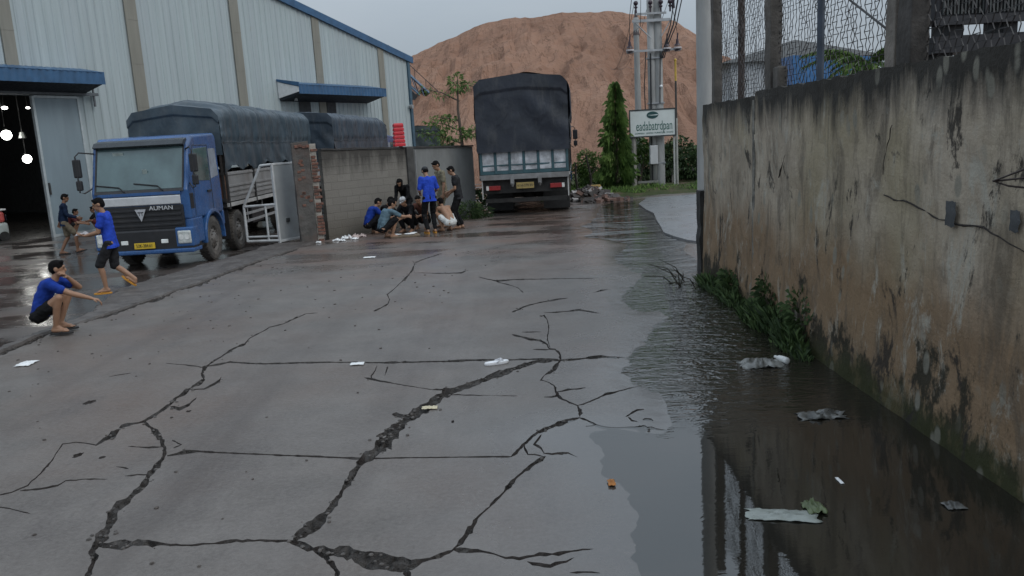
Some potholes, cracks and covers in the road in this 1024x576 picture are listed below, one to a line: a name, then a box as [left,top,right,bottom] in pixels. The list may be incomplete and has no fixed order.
crack [0,252,663,576]
